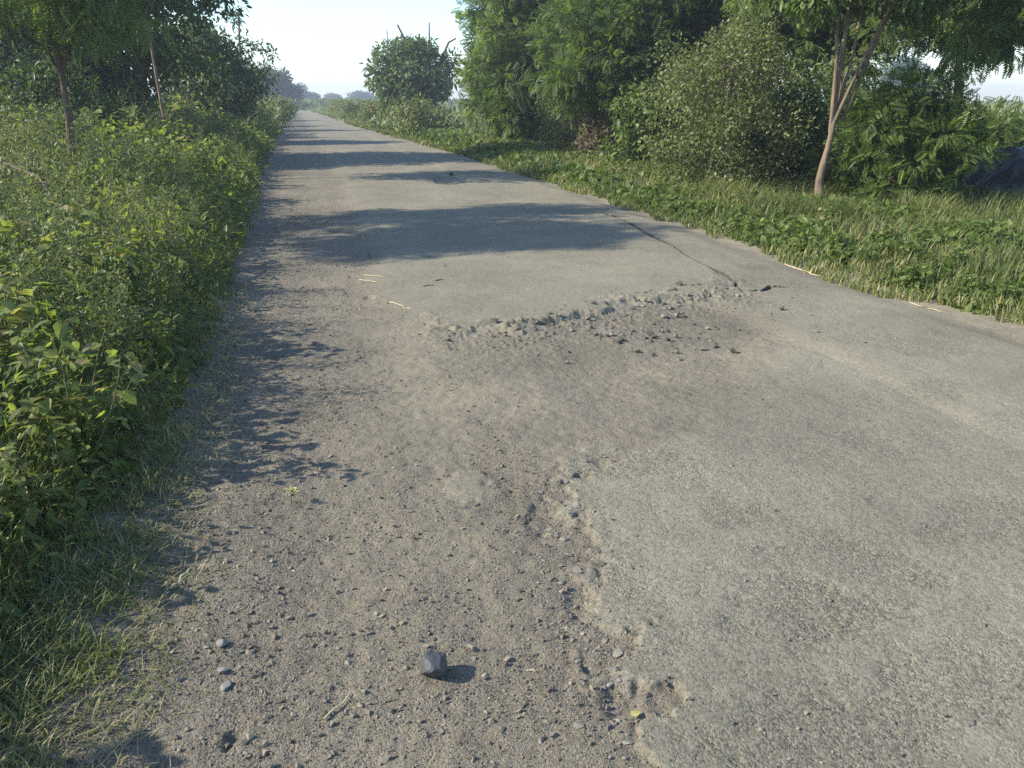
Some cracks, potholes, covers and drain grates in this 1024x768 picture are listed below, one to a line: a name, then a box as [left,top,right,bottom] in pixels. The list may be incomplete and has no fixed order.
crack [602,212,786,291]
pothole [586,661,656,732]
pothole [515,494,580,546]
pothole [554,579,606,629]
